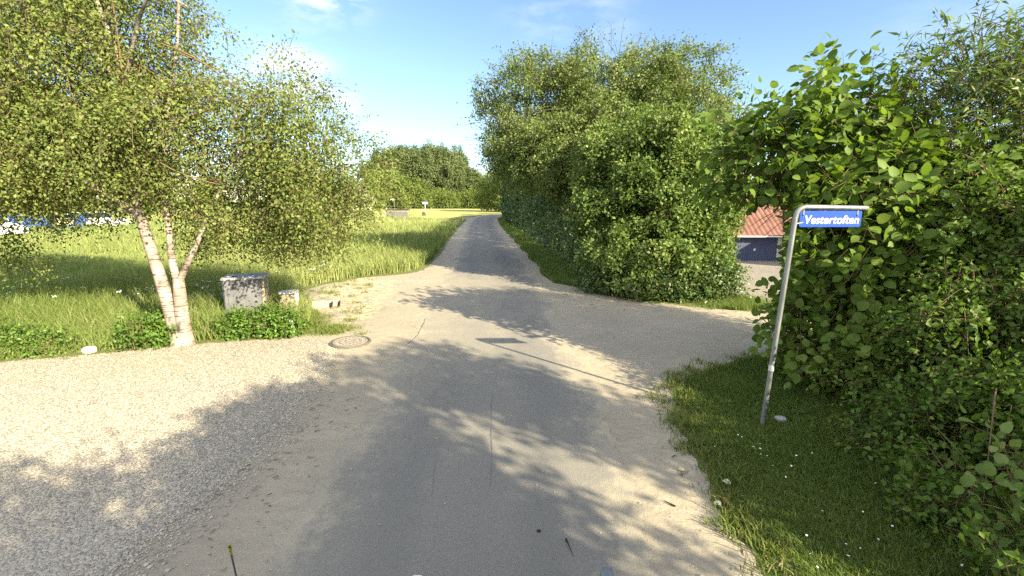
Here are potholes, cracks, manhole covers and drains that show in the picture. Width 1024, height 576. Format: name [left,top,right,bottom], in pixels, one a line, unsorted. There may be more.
manhole cover [329,336,371,349]
